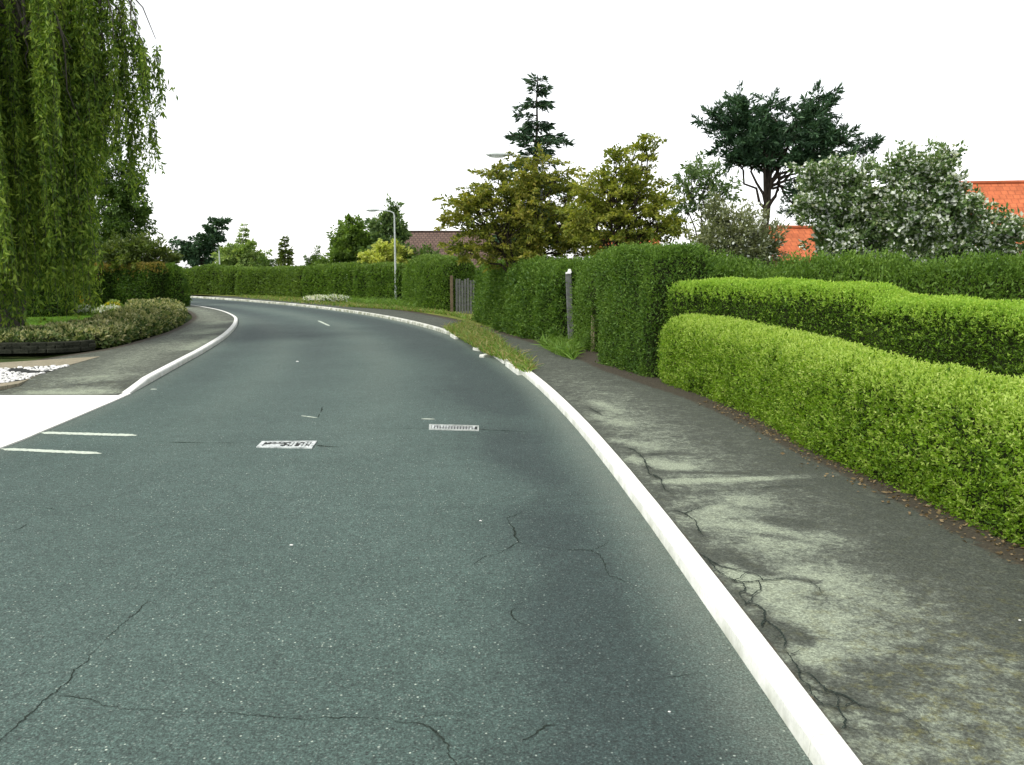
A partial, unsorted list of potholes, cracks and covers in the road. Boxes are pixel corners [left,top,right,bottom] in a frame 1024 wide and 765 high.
crack [0,598,469,765]
crack [628,447,932,736]
crack [474,514,634,587]
